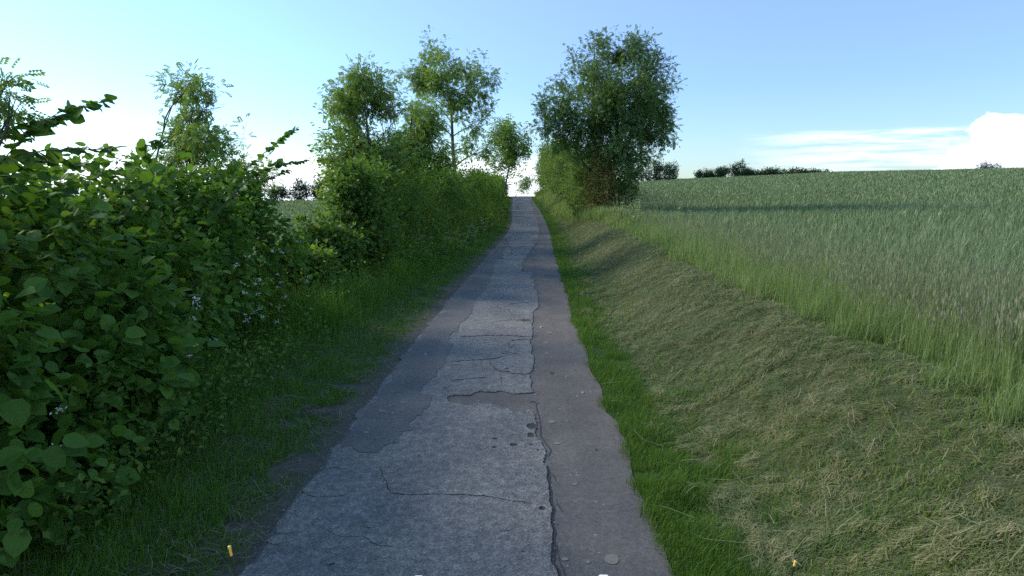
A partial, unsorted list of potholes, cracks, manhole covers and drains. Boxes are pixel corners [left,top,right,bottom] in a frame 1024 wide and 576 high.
crack [454,302,533,384]
